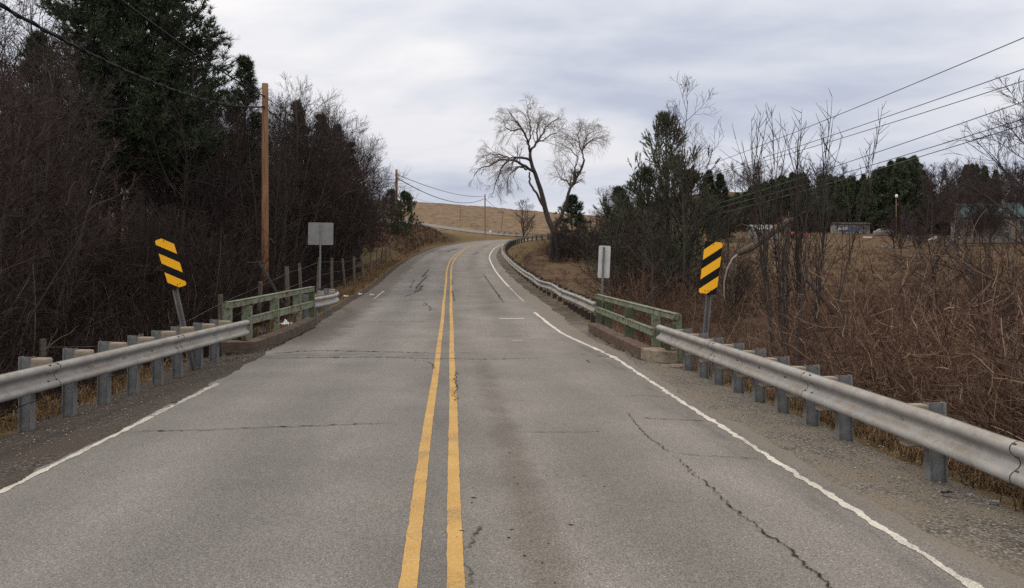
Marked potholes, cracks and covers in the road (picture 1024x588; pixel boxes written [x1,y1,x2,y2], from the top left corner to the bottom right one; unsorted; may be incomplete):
crack [629,414,833,588]
crack [463,525,483,583]
crack [131,423,377,432]
